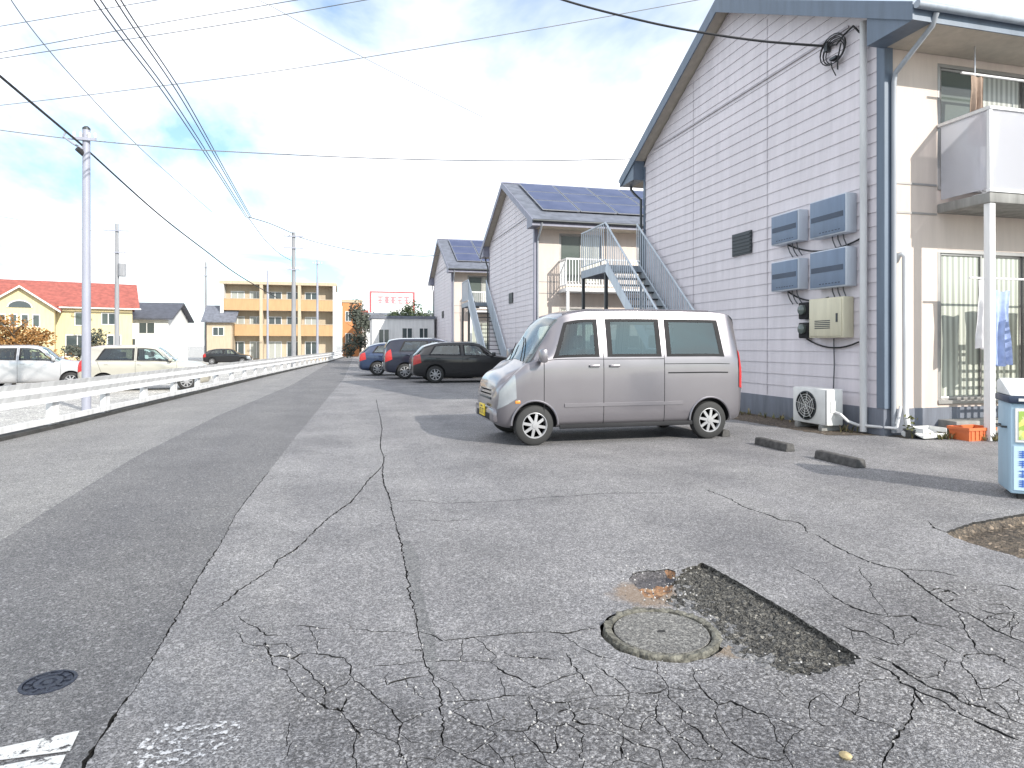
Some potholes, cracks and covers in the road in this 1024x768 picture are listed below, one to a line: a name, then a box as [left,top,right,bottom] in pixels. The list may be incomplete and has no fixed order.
manhole cover [600,606,722,663]
utility cover [17,669,78,695]
pothole [947,514,1024,559]
crack [213,400,1024,768]
pothole [629,569,676,599]
